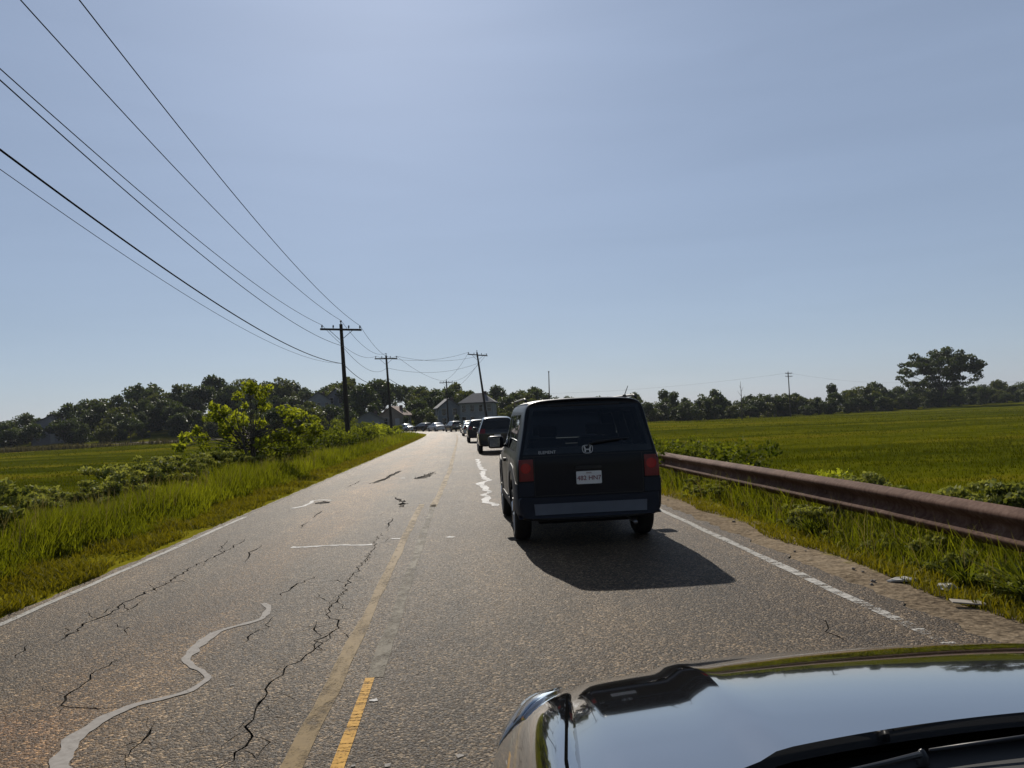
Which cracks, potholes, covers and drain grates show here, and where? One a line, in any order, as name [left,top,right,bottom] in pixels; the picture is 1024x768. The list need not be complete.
crack [59,539,260,641]
crack [89,717,169,768]
crack [180,512,393,768]
crack [23,650,161,725]
